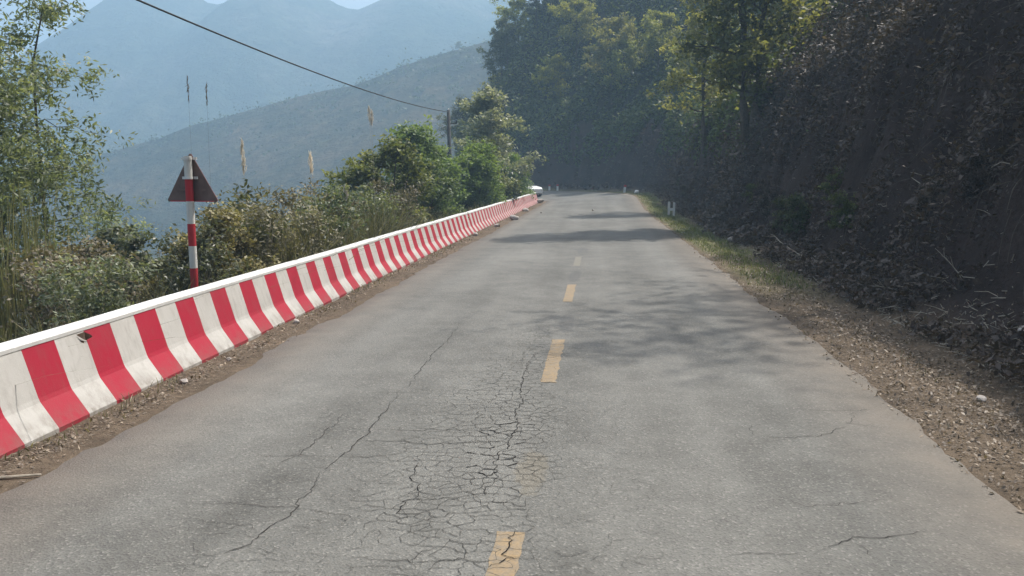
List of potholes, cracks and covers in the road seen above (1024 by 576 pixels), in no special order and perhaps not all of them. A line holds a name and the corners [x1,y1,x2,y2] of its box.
crack [767,491,928,560]
crack [156,321,661,576]
